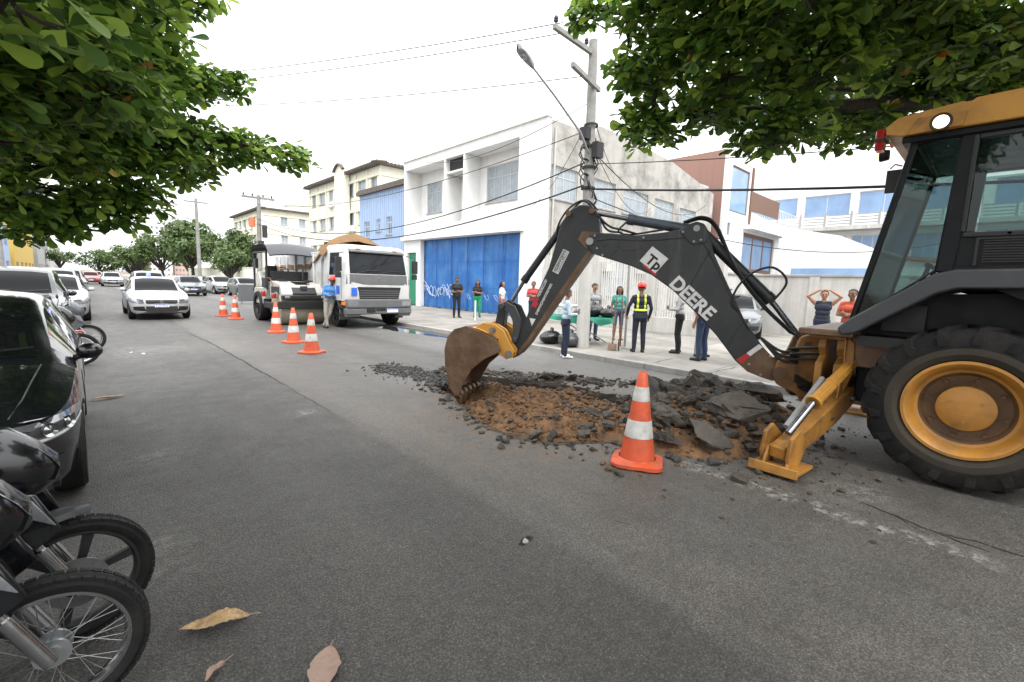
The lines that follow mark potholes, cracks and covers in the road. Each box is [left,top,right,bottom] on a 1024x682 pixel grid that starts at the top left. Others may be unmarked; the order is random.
pothole [434,376,621,445]
crack [862,502,1024,557]
